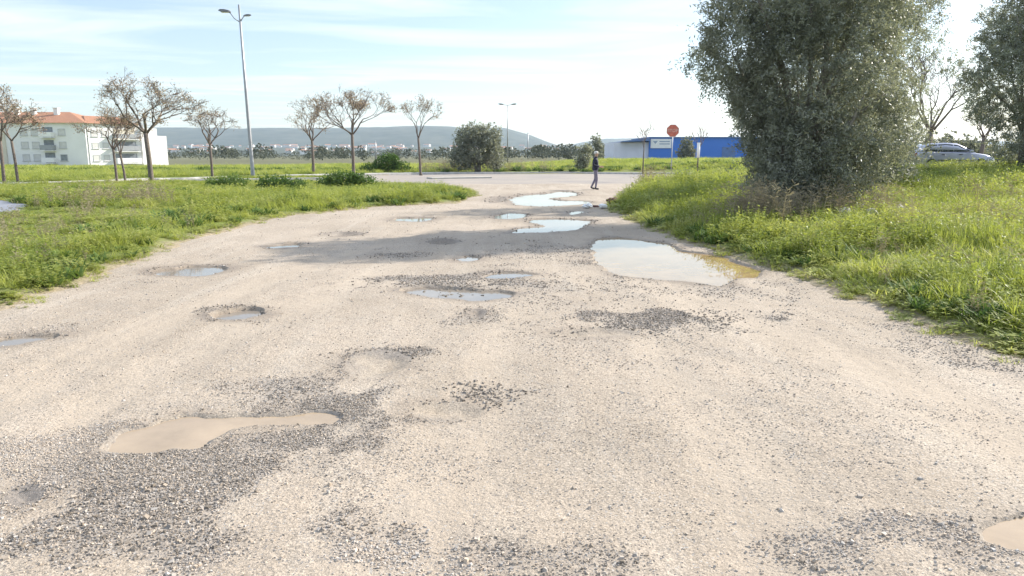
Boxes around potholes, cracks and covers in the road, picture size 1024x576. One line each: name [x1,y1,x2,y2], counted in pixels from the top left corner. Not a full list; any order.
pothole [197,305,275,321]
pothole [393,284,517,302]
pothole [583,236,765,286]
pothole [502,191,593,207]
pothole [454,254,483,262]
pothole [143,264,235,276]
pothole [481,269,540,279]
pothole [0,331,69,347]
pothole [92,403,354,455]
pothole [508,217,598,233]
